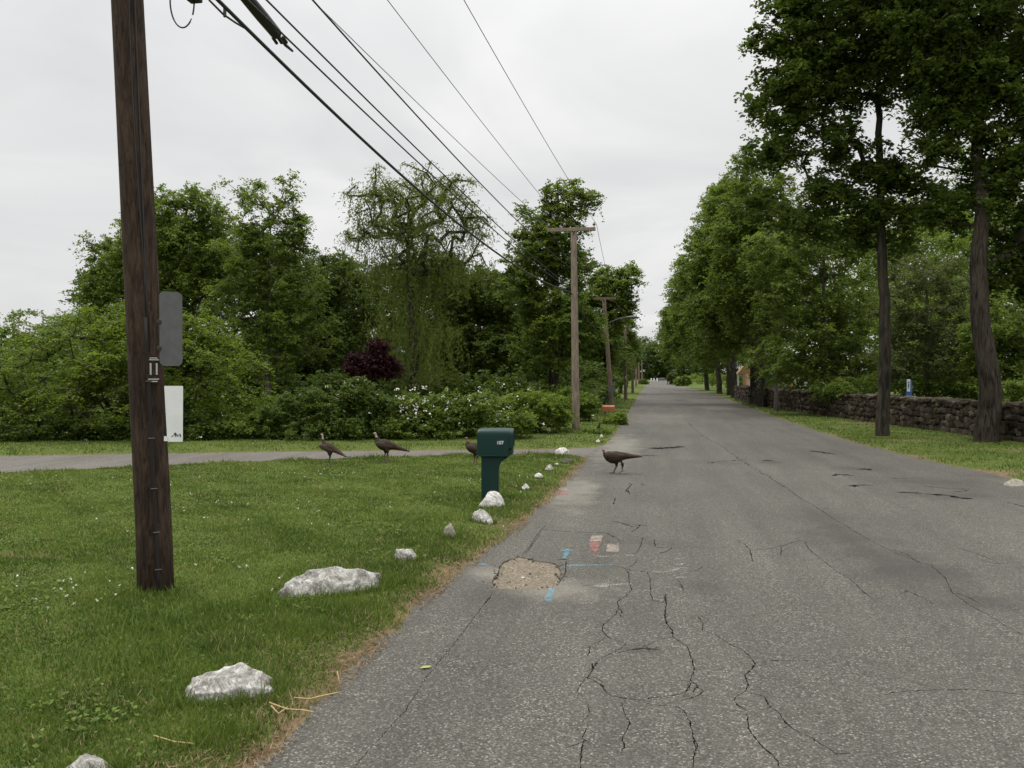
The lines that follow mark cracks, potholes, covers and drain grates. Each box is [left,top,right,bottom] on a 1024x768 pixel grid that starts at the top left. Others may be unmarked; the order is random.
crack [737,540,883,600]
crack [577,569,848,768]
crack [567,728,591,768]
pothole [482,555,568,590]
